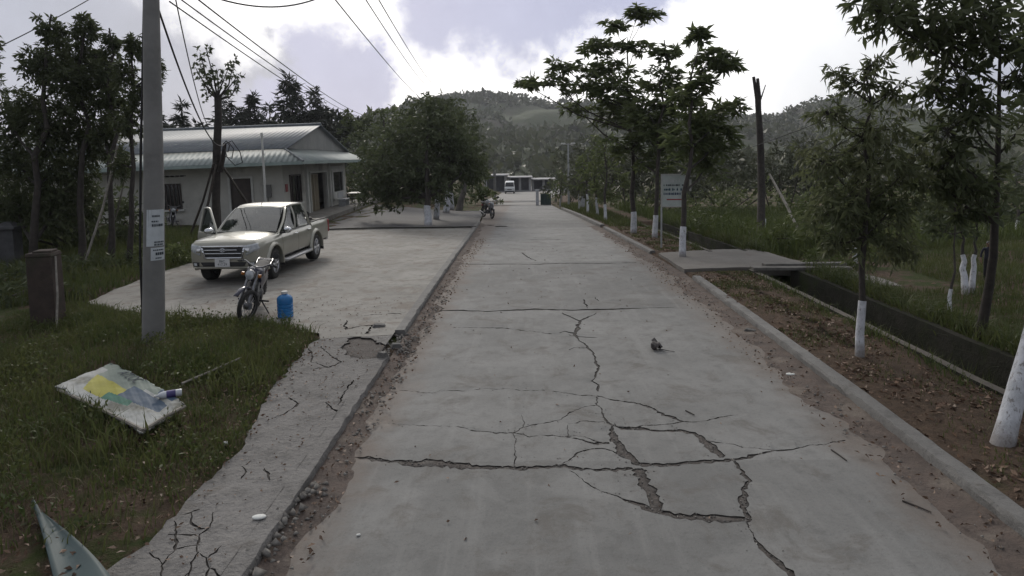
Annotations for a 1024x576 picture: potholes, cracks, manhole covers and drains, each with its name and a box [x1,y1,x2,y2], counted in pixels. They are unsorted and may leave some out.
crack [343,320,373,334]
crack [149,509,222,576]
crack [440,297,600,391]
pothole [340,337,386,359]
crack [308,346,354,412]
